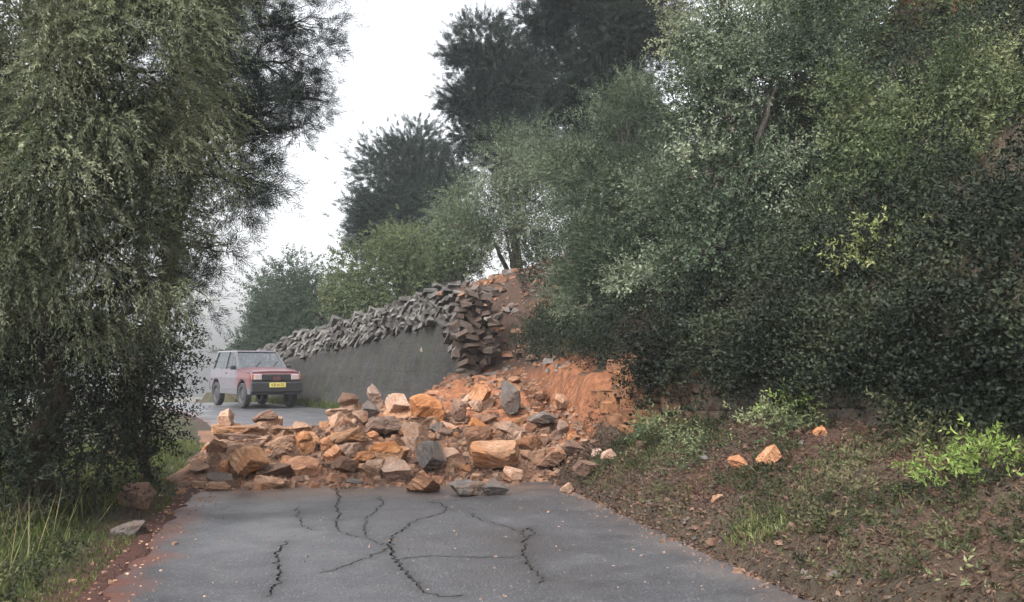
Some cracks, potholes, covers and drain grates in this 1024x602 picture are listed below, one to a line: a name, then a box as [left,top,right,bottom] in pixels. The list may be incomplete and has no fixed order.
crack [267,506,311,597]
